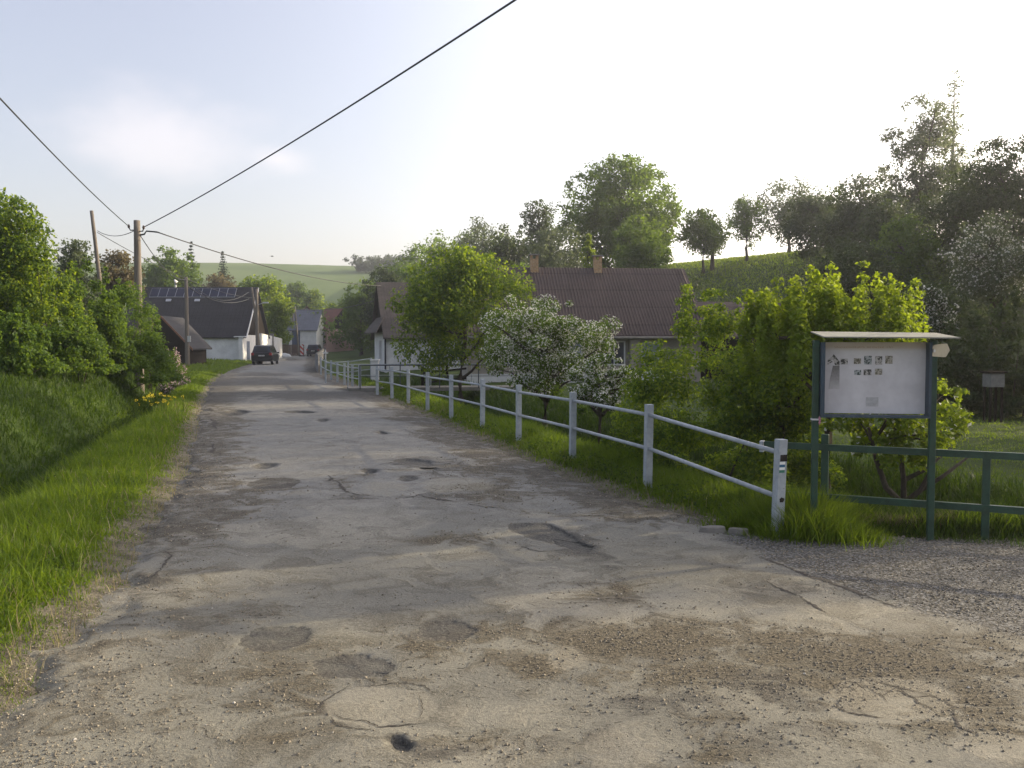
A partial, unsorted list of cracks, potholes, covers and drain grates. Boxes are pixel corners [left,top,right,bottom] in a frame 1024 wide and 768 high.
pothole [401,616,492,646]
pothole [382,457,444,468]
crack [328,475,371,496]
pothole [222,621,328,657]
crack [146,537,178,578]
pothole [497,521,607,556]
crack [319,678,433,730]
crack [754,554,904,612]
crack [825,675,982,735]
pothole [293,648,413,685]
pothole [388,474,430,483]
pothole [241,462,290,471]
